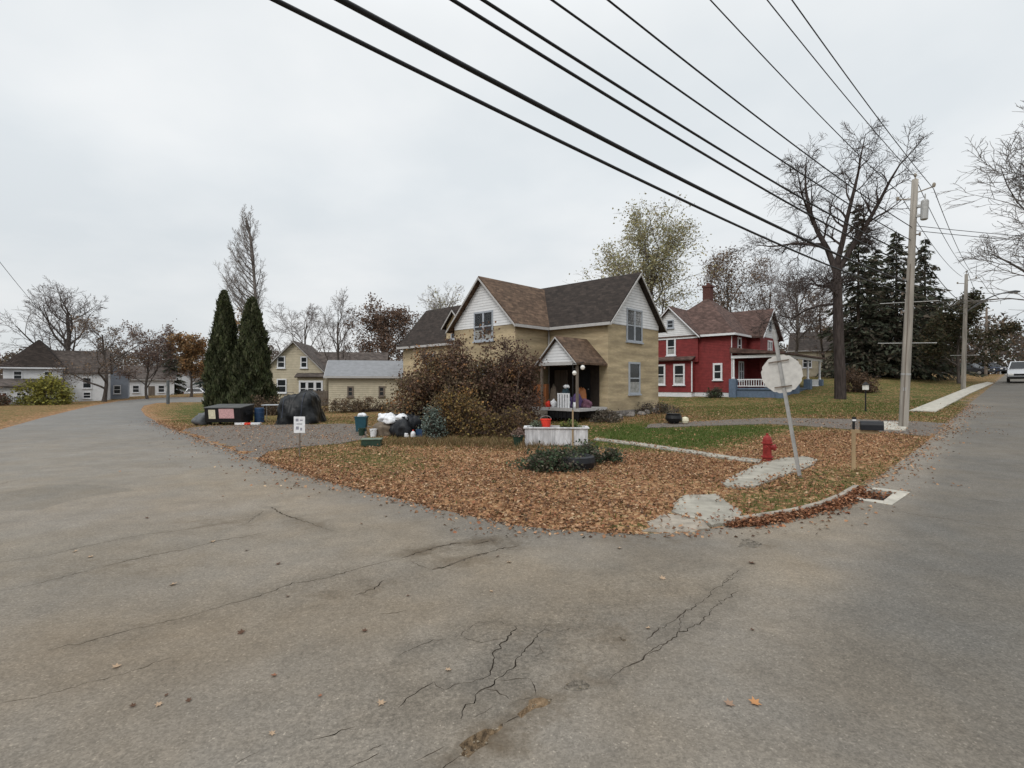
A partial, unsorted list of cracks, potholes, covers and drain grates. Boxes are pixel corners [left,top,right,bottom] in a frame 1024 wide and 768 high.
pothole [459,723,503,758]
crack [400,621,570,768]
pothole [517,697,552,718]
drain grate [856,487,910,510]
crack [610,570,739,679]
